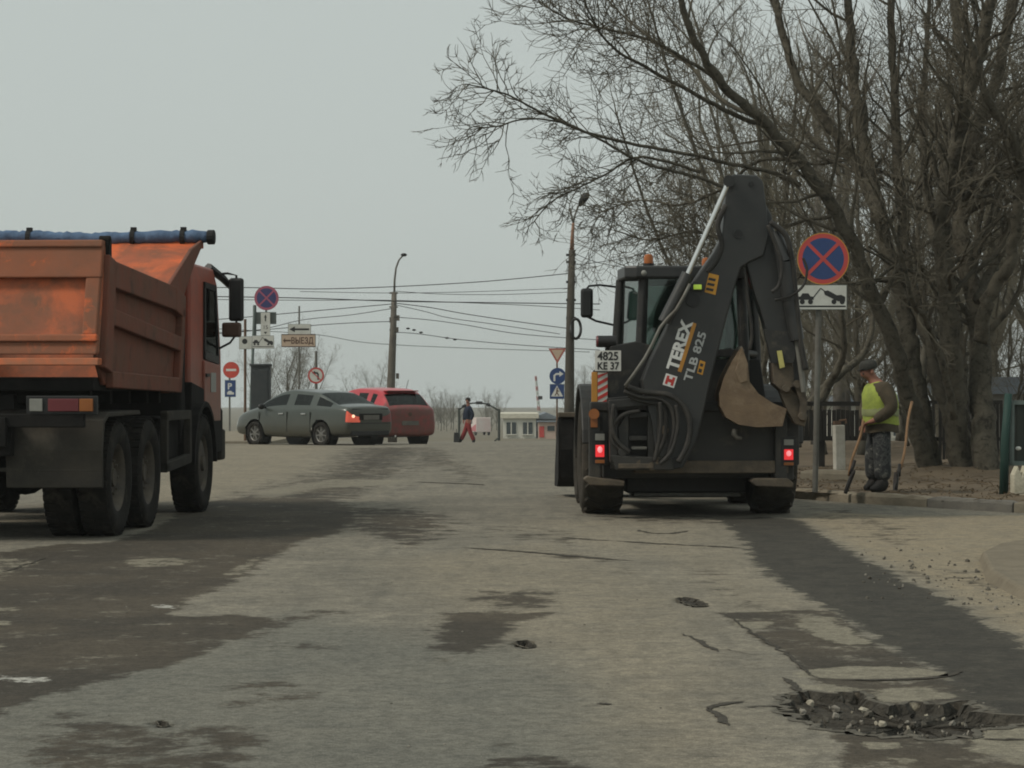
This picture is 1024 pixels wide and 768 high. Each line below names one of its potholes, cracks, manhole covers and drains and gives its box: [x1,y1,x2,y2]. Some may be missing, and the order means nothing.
pothole [514,640,537,649]
pothole [675,597,709,607]
pothole [771,690,1024,741]
crack [682,612,826,725]
crack [465,530,741,561]
